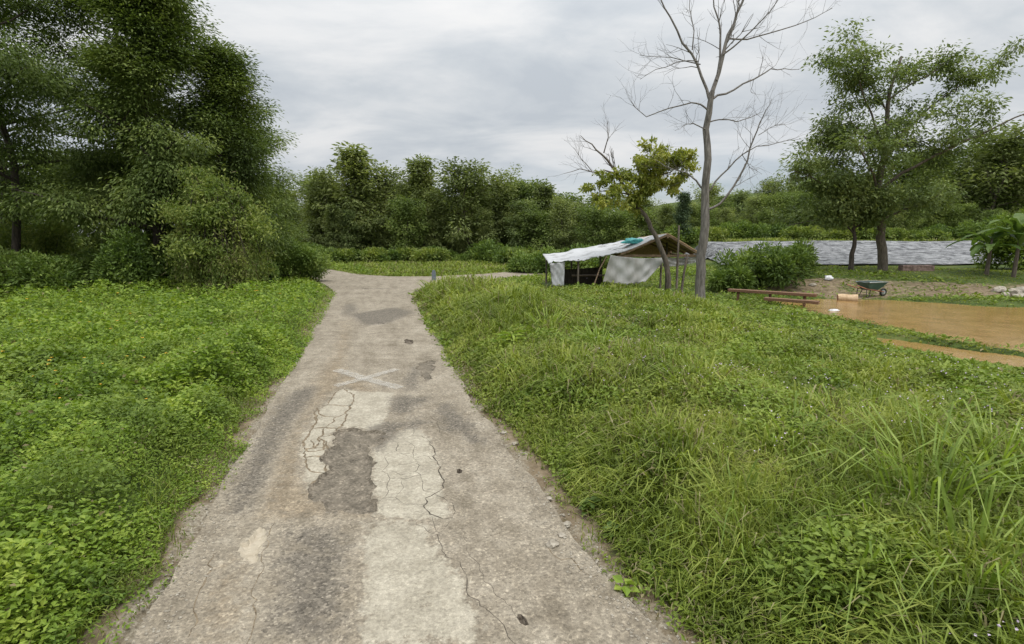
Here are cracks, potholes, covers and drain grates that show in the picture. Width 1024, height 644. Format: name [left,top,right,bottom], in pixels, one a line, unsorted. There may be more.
crack [377,418,516,644]
crack [246,523,275,644]
crack [188,555,214,637]
